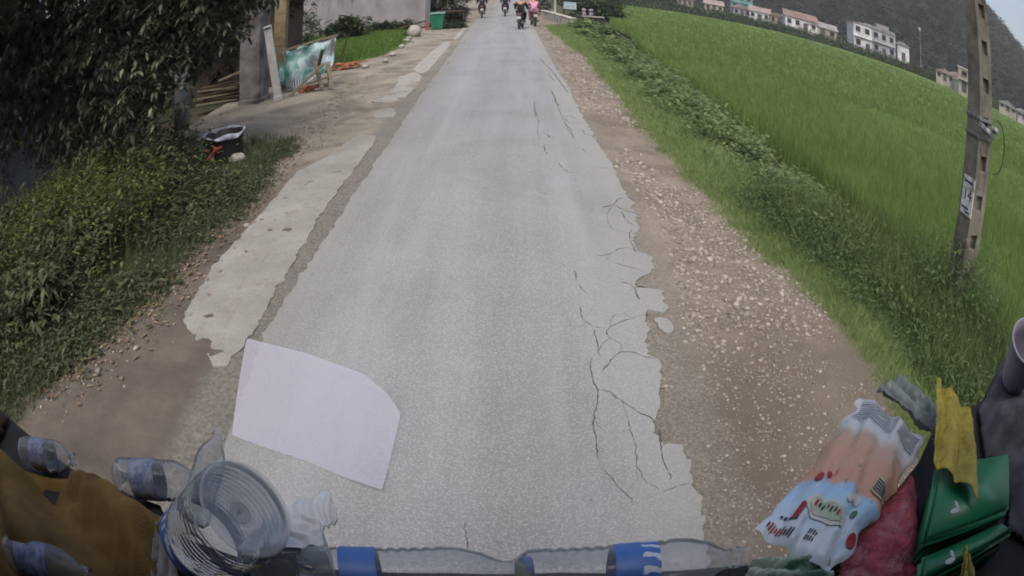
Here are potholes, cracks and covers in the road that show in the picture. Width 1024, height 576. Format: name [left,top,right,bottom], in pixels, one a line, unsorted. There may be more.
crack [580,197,685,491]
crack [533,57,598,173]
